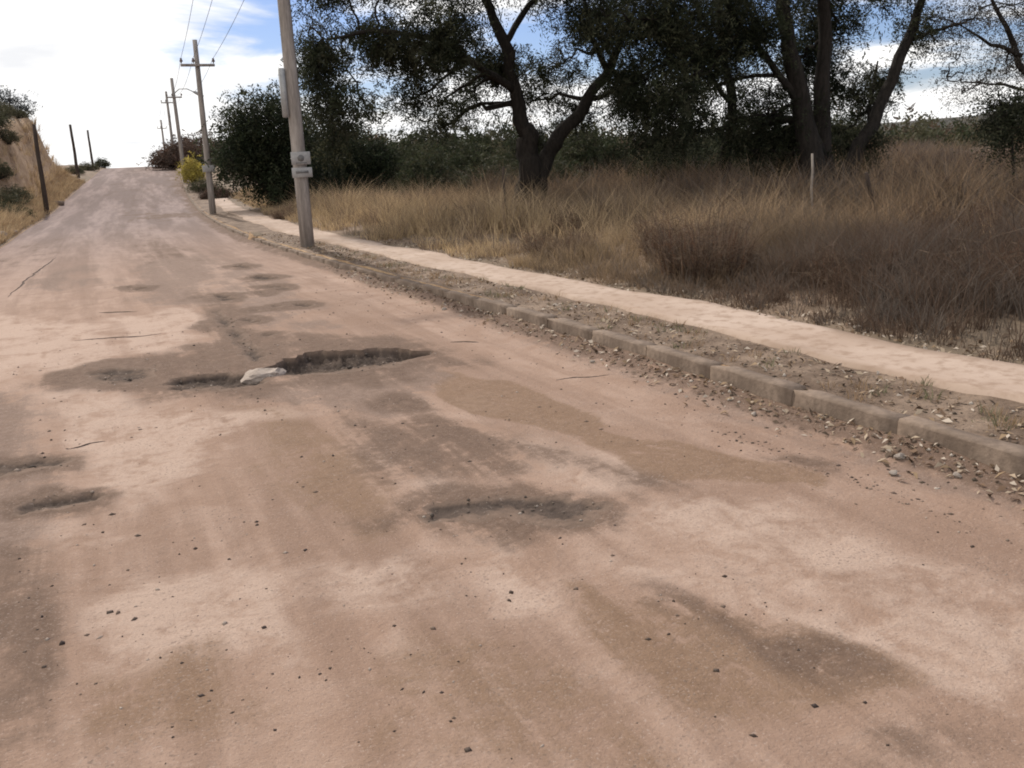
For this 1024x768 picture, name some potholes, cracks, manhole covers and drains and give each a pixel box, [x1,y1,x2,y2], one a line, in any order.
pothole [160,372,269,391]
pothole [0,456,77,478]
crack [75,333,161,341]
pothole [11,491,110,517]
pothole [417,495,613,529]
pothole [83,366,158,385]
pothole [264,347,435,377]
crack [8,257,57,297]
